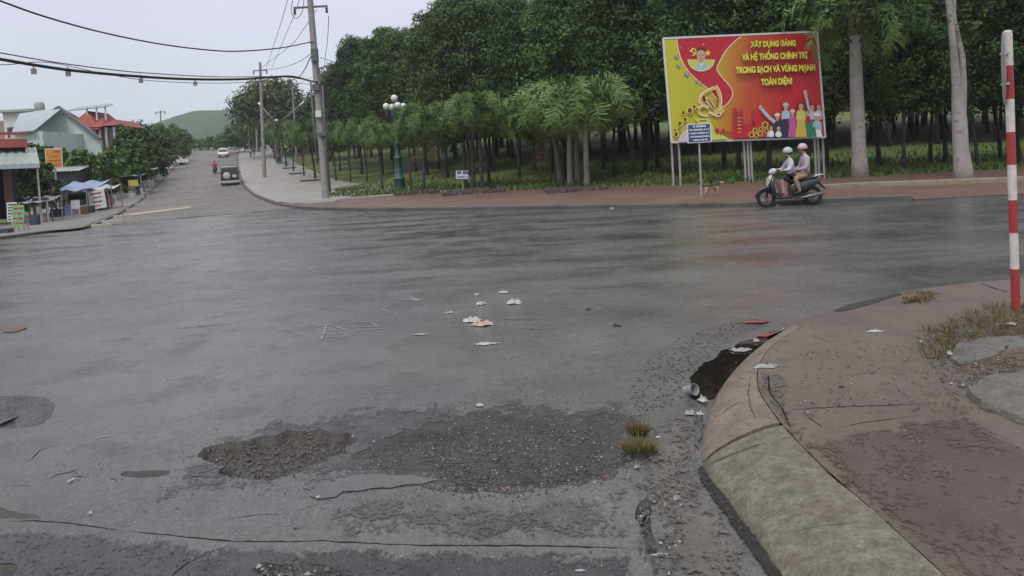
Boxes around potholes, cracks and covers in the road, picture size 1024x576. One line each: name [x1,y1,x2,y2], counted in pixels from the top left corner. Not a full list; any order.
crack [18,447,85,479]
pothole [197,429,357,481]
crack [793,404,920,429]
crack [4,520,117,530]
